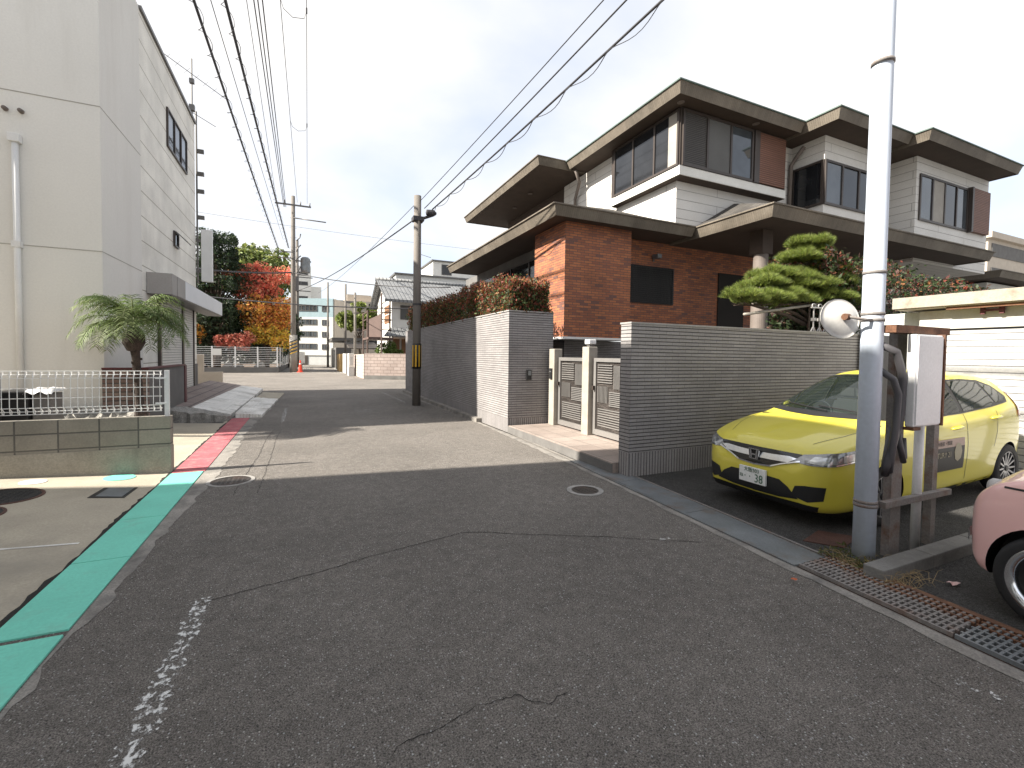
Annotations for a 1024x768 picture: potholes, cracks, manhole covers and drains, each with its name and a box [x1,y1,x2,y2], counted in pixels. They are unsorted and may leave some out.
crack [211,532,694,600]
drain grate [799,555,984,637]
manhole cover [567,485,604,496]
crack [394,692,569,753]
manhole cover [205,475,255,487]
drain grate [954,619,1024,670]
